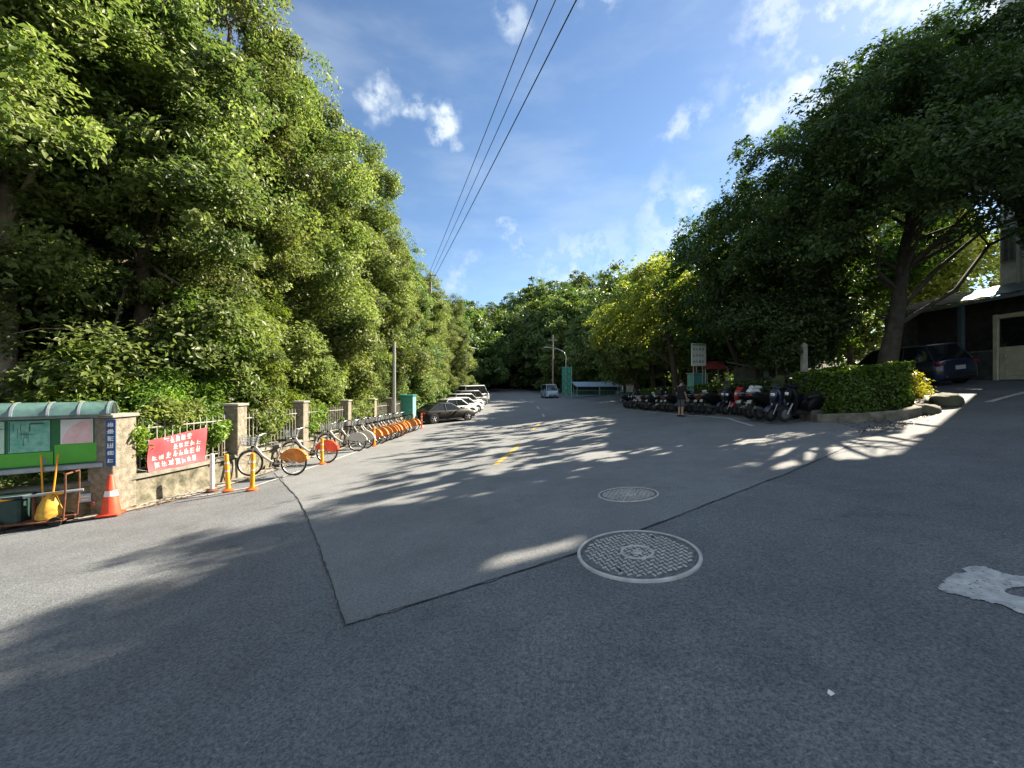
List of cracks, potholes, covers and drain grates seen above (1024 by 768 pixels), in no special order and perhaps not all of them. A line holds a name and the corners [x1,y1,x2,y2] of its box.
manhole cover [577,530,703,583]
manhole cover [598,487,659,502]
